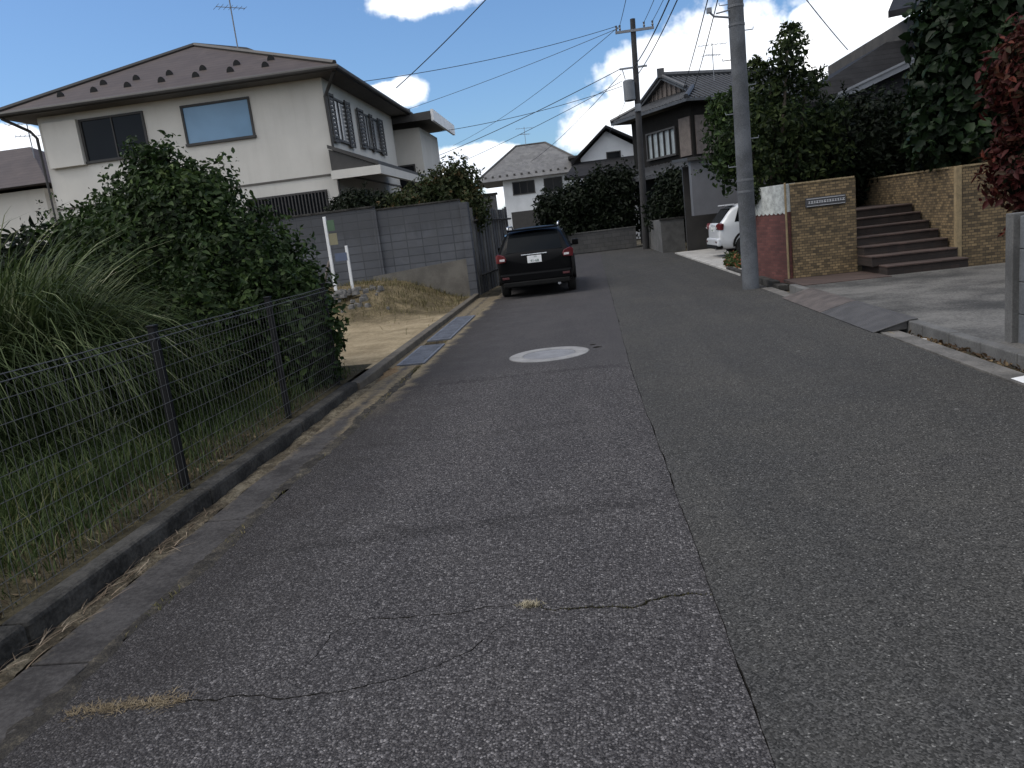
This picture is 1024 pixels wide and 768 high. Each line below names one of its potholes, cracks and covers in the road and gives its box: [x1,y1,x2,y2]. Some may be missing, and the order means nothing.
crack [63,257,776,768]
manhole cover [509,346,590,363]
